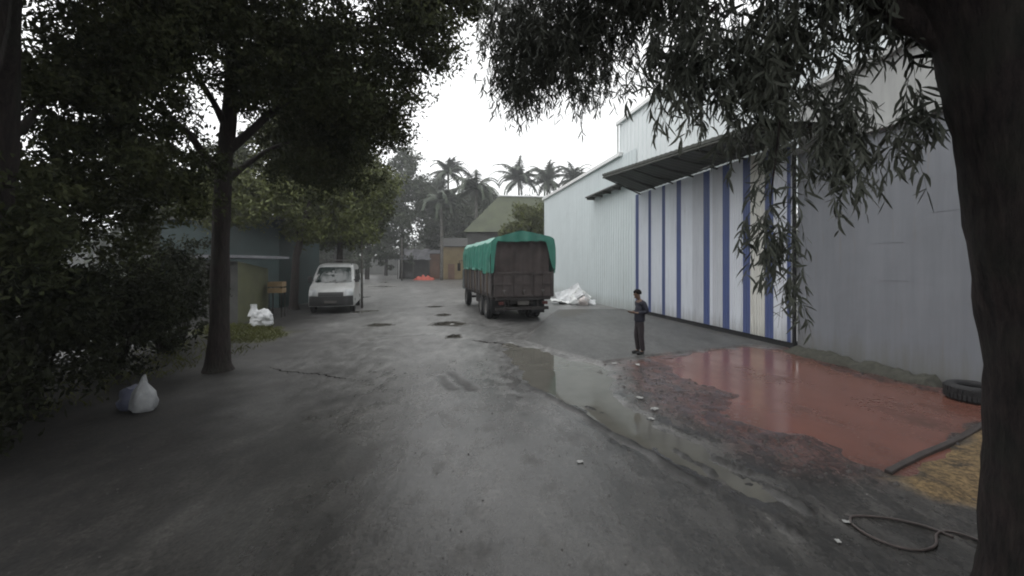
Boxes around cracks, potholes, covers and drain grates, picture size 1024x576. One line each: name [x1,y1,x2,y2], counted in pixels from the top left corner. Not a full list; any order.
crack [270,367,346,379]
